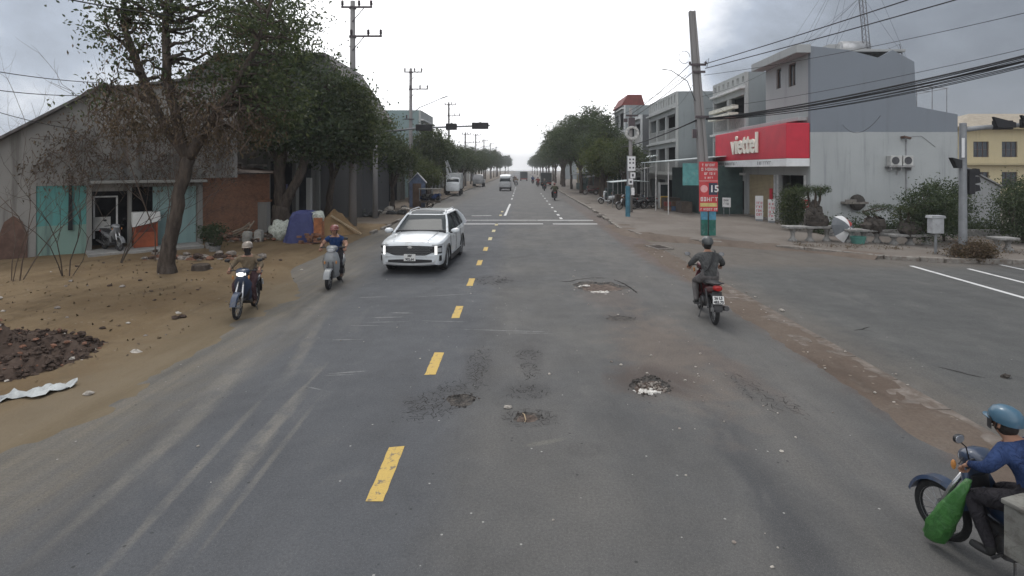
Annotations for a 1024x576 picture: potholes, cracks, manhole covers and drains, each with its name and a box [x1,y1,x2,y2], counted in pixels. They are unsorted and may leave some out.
pothole [628,375,673,397]
pothole [511,412,544,423]
crack [405,346,492,423]
pothole [443,393,480,408]
crack [731,375,808,420]
crack [502,350,556,425]
pothole [572,281,634,294]
